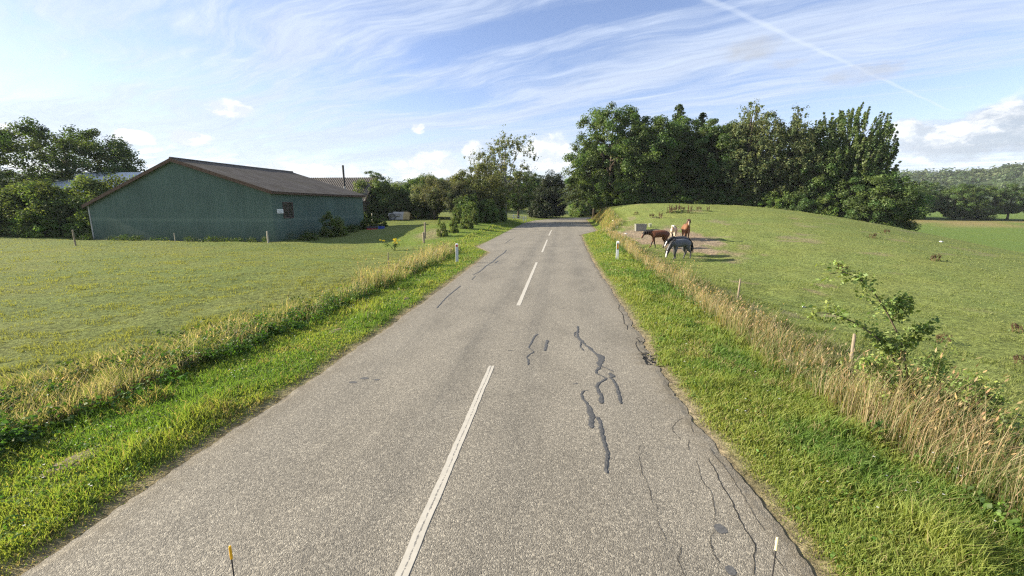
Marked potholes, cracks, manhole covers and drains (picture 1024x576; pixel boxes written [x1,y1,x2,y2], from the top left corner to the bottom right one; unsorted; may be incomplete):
crack [672,418,788,575]
crack [638,446,684,575]
